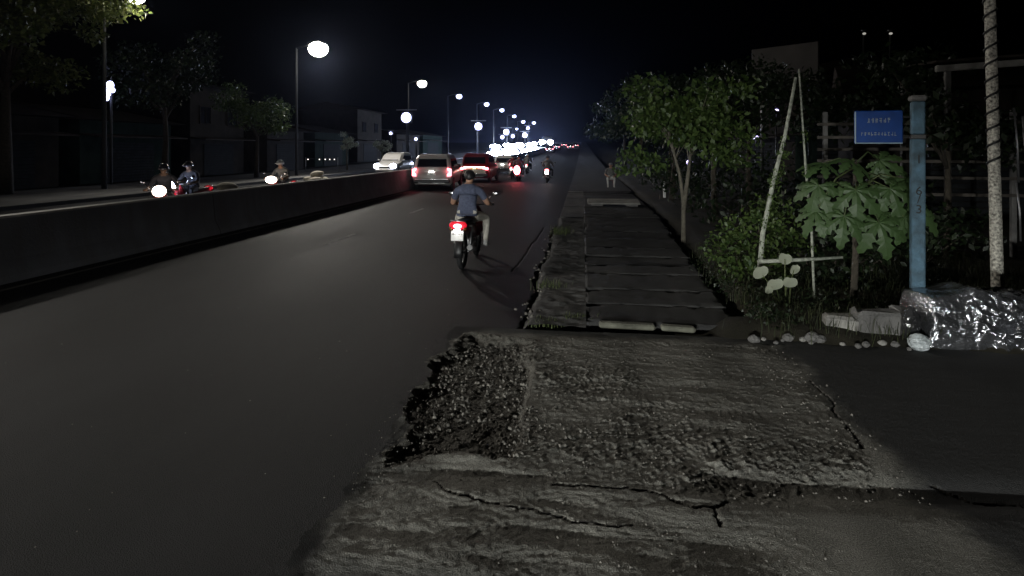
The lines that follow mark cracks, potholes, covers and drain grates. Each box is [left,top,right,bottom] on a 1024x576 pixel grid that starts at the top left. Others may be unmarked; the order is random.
crack [436,482,634,529]
crack [809,380,865,449]
crack [552,483,728,527]
pothole [380,331,541,469]
